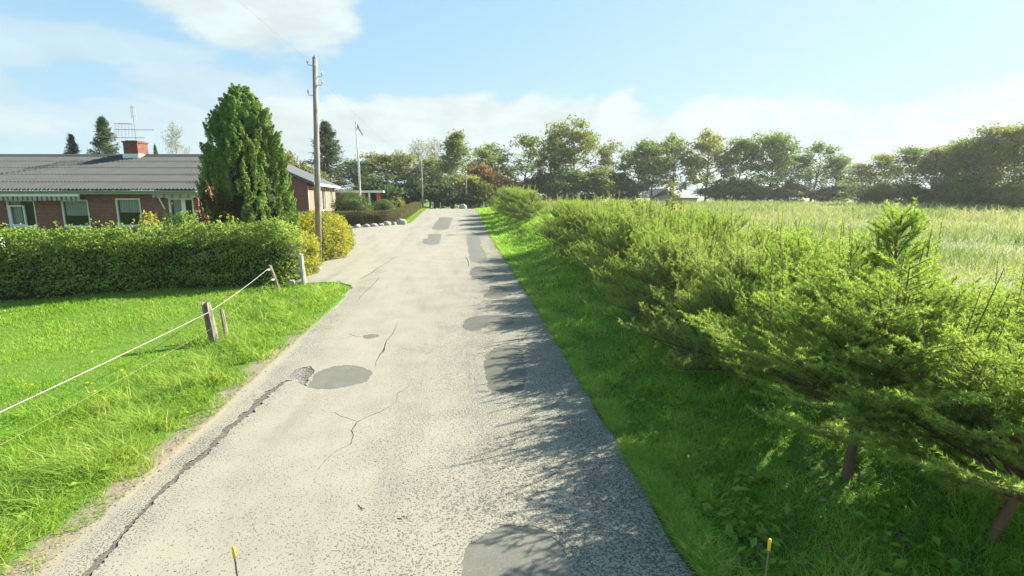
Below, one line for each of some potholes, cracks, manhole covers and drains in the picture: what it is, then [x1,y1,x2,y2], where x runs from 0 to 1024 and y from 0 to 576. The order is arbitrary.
crack [81,380,291,576]
pothole [287,366,314,386]
